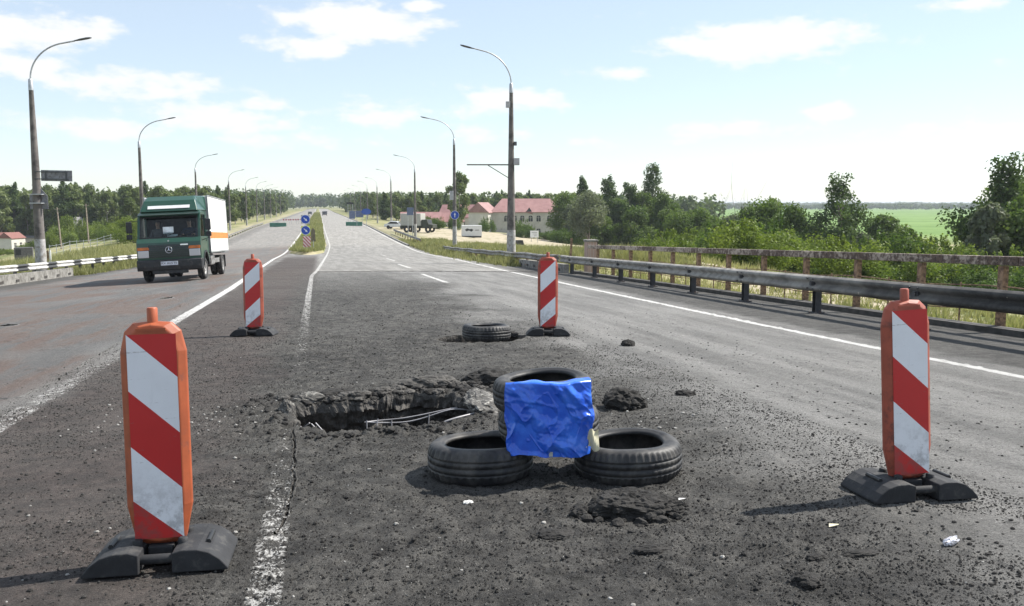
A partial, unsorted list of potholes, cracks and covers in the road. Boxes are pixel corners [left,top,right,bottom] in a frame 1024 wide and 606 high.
crack [235,422,299,533]
pothole [429,335,531,344]
pothole [260,388,489,438]
